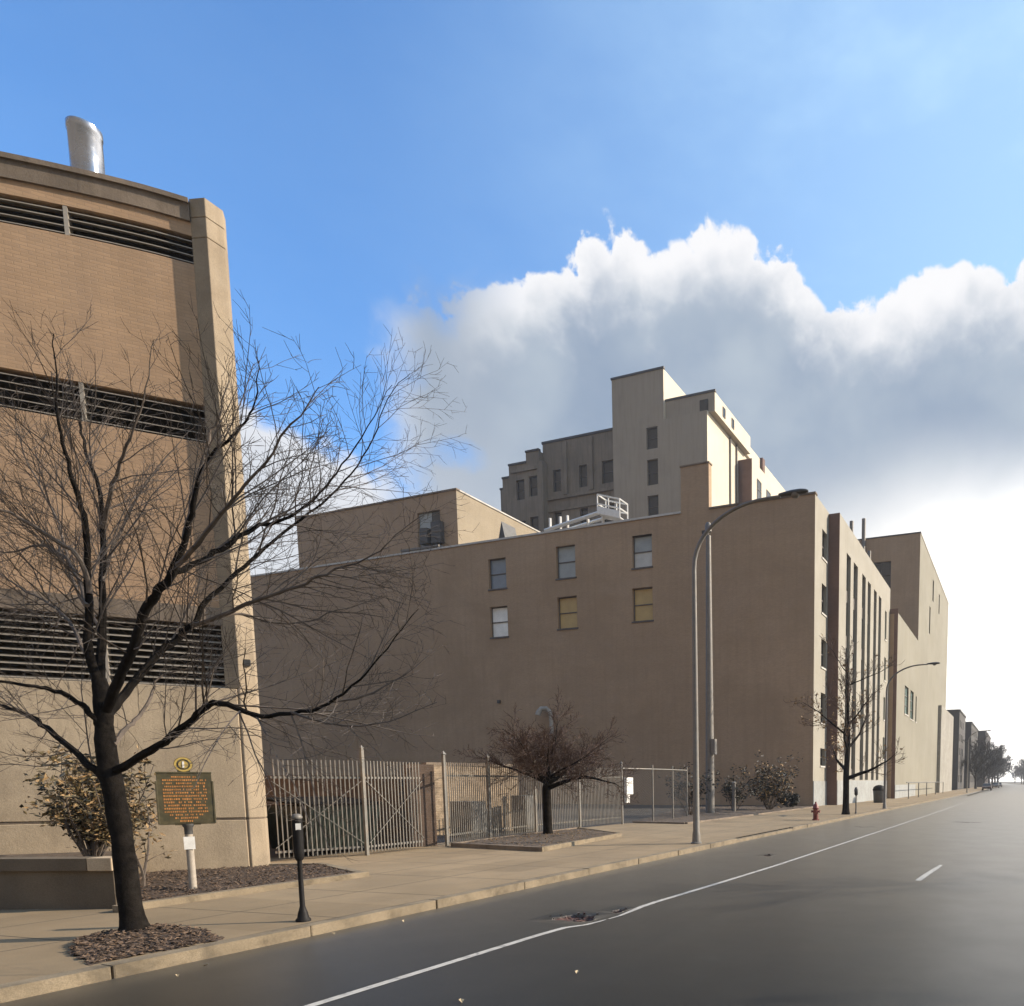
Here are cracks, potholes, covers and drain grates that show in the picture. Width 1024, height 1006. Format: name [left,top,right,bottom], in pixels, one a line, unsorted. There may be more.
pothole [550,912,599,922]
